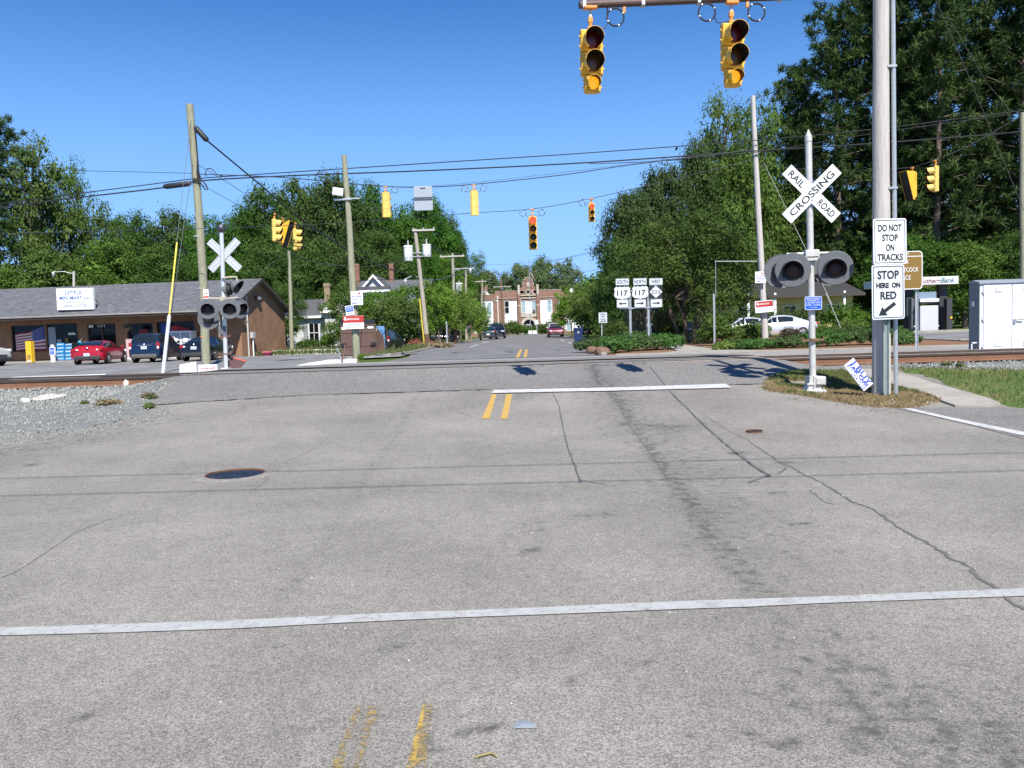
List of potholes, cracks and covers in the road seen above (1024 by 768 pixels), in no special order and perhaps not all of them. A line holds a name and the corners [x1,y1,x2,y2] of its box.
crack [606,391,756,486]
crack [701,412,1024,610]
manhole cover [190,466,279,482]
